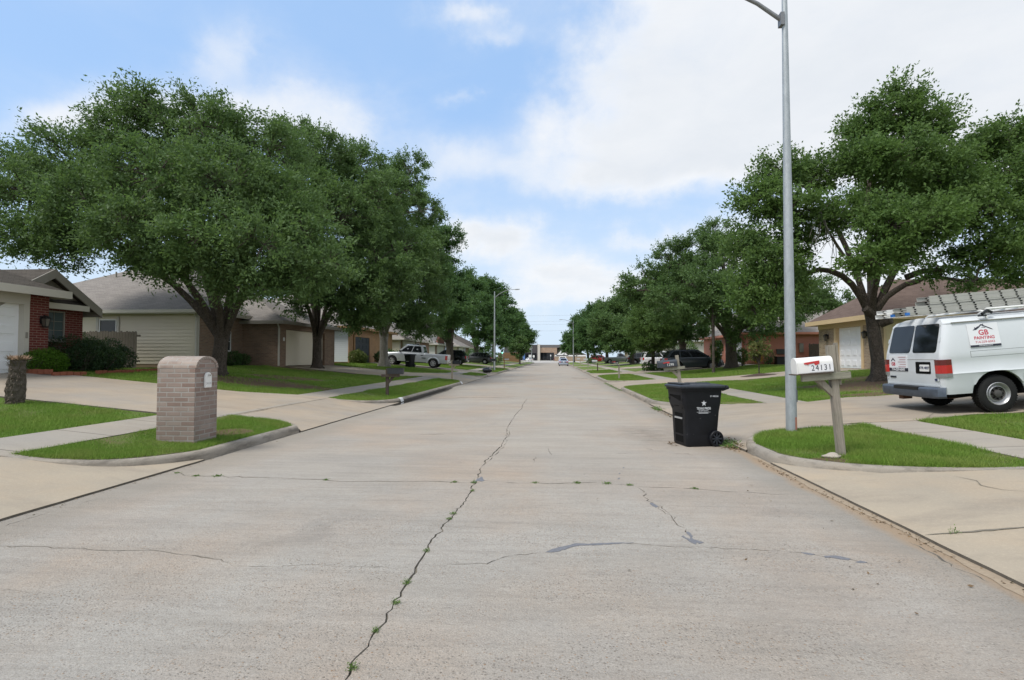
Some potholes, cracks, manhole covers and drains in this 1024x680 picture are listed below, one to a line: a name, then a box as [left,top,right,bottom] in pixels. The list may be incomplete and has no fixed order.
crack [7,401,779,680]
